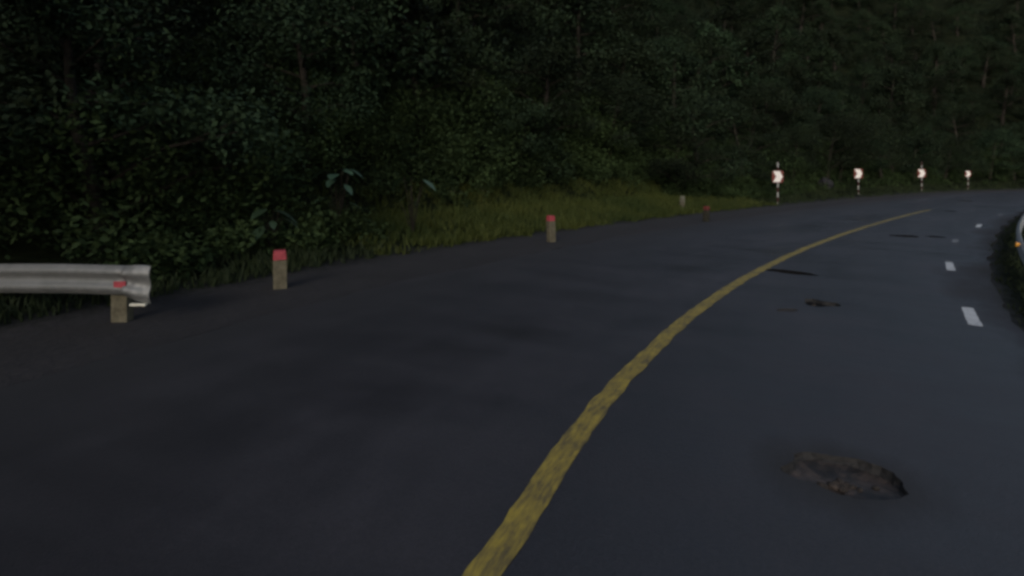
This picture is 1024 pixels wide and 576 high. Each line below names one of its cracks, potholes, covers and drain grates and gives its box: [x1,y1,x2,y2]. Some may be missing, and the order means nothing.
pothole [780,452,909,500]
pothole [804,299,841,307]
